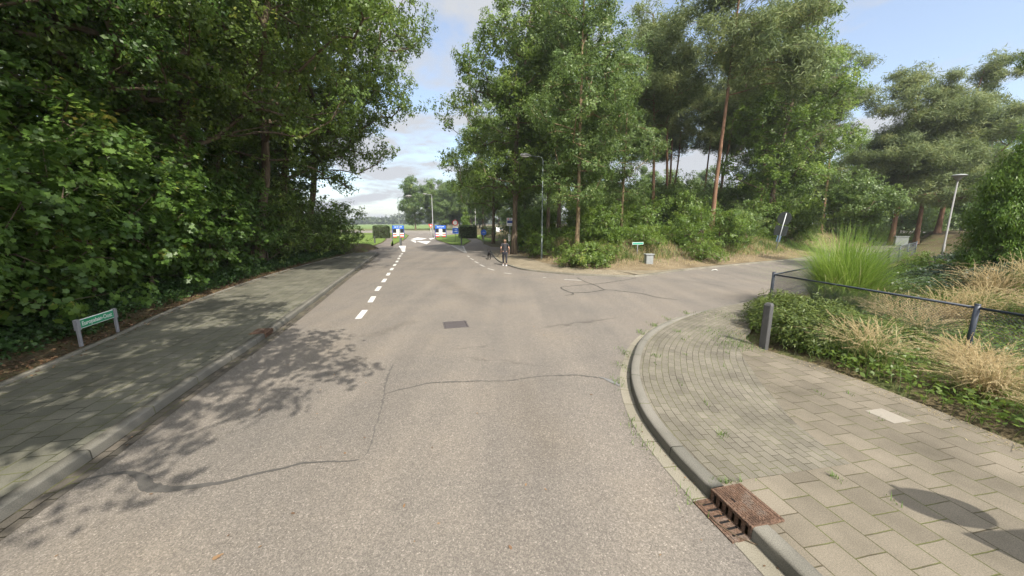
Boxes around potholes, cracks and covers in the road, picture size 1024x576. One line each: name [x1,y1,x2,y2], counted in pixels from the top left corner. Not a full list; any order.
manhole cover [443,320,469,329]
drain grate [693,483,785,544]
crack [364,365,620,456]
crack [560,277,677,300]
